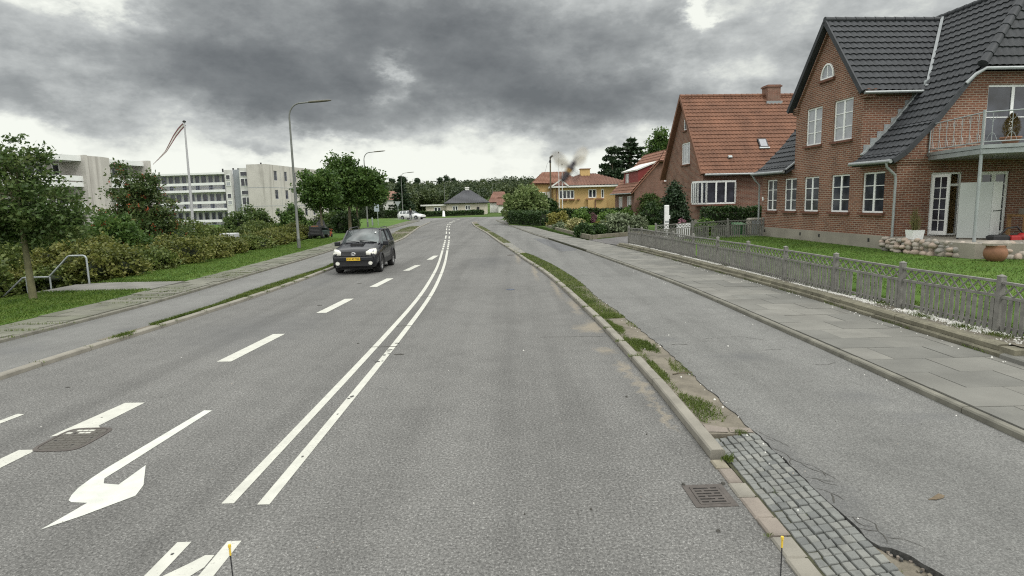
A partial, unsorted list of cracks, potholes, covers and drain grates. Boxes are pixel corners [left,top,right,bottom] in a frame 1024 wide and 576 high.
manhole cover [32,427,112,452]
crack [758,431,925,548]
drain grate [682,484,739,508]
